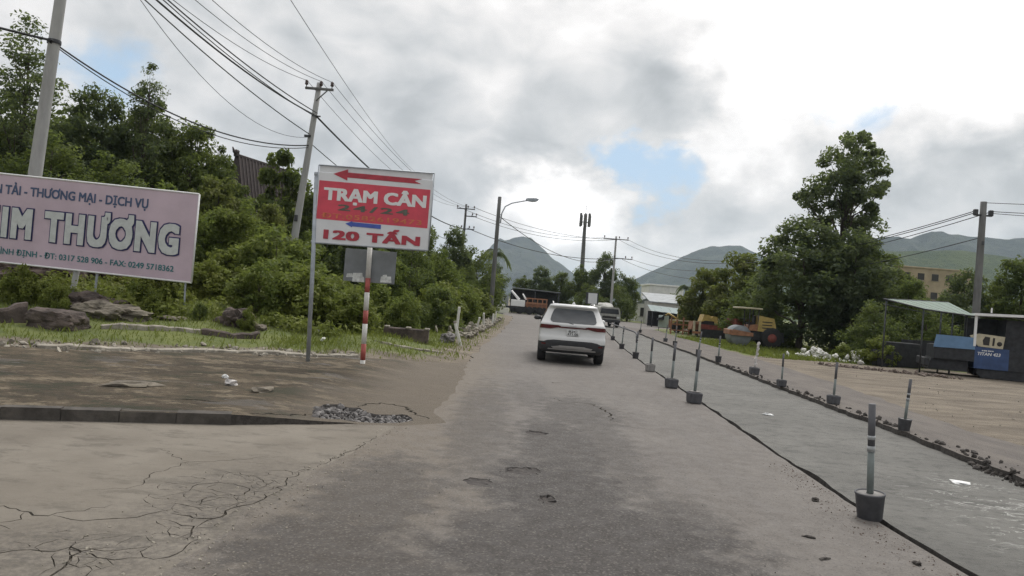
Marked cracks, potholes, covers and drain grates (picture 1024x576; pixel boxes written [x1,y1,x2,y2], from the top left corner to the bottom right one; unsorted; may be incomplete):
pothole [538,494,557,504]
pothole [312,404,413,423]
pothole [505,467,541,475]
crack [0,435,377,576]
pothole [463,477,493,485]
